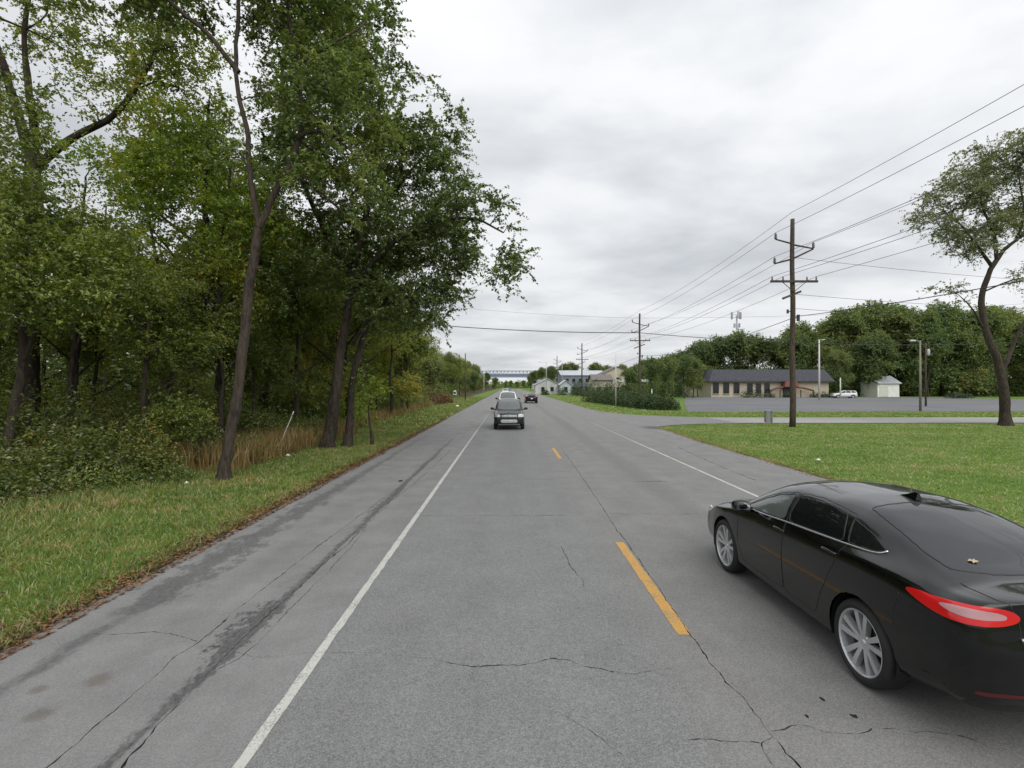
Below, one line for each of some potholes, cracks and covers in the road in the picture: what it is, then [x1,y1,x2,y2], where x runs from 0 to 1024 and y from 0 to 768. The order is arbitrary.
crack [46,499,658,768]
